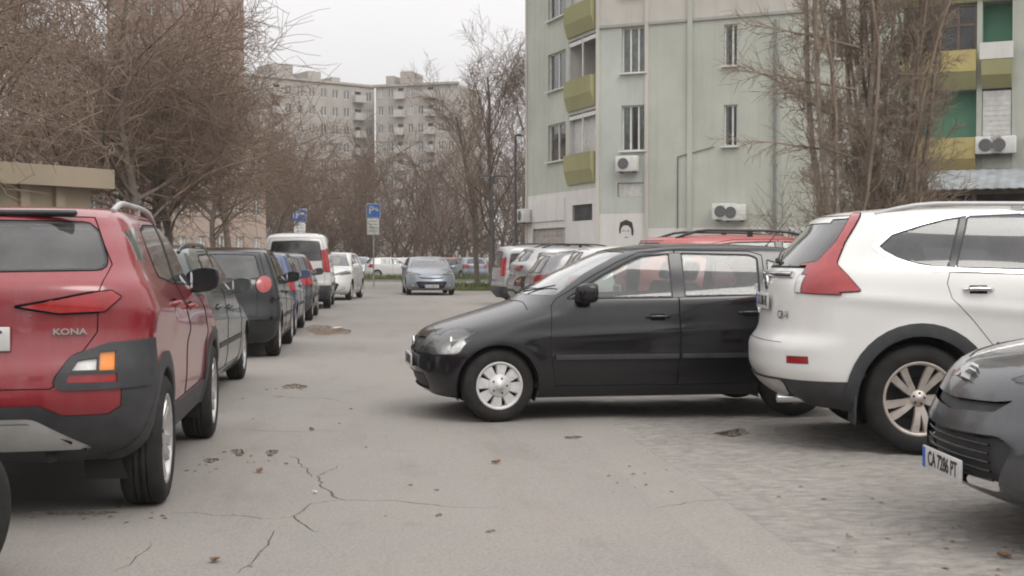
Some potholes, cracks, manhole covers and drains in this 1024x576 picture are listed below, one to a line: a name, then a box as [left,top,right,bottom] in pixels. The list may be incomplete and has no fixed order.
pothole [713,428,749,437]
crack [165,457,492,573]
pothole [305,325,351,335]
